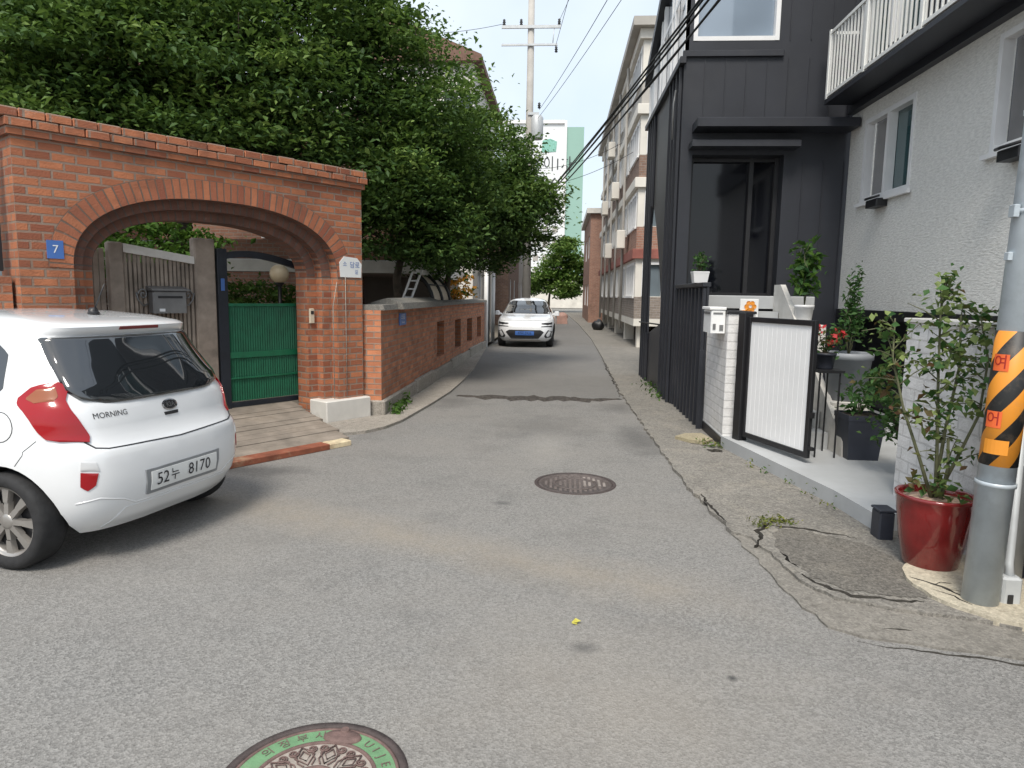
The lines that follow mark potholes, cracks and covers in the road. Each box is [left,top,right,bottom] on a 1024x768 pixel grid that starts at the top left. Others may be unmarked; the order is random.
manhole cover [226,722,408,768]
manhole cover [534,473,616,495]
crack [857,628,1024,667]
crack [701,494,726,521]
crack [754,519,972,605]
